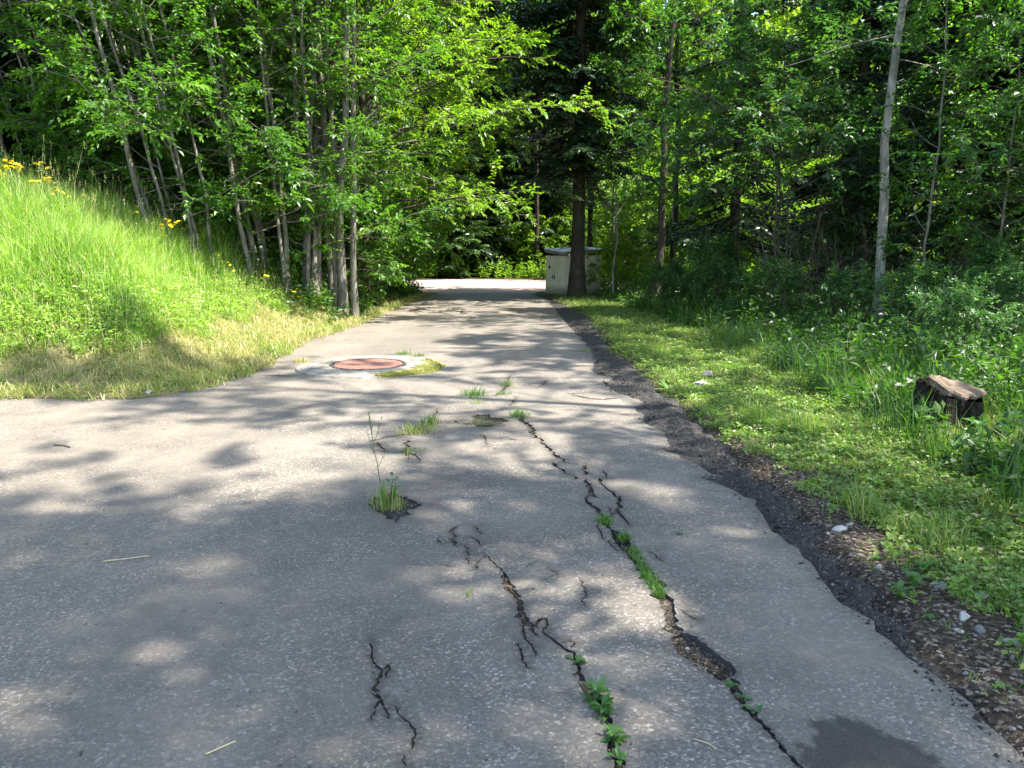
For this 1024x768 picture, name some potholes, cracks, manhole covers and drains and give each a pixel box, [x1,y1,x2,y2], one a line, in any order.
pothole [455,414,509,427]
crack [495,376,804,768]
manhole cover [295,355,447,379]
pothole [369,493,422,522]
crack [369,643,417,767]
crack [437,526,626,768]
